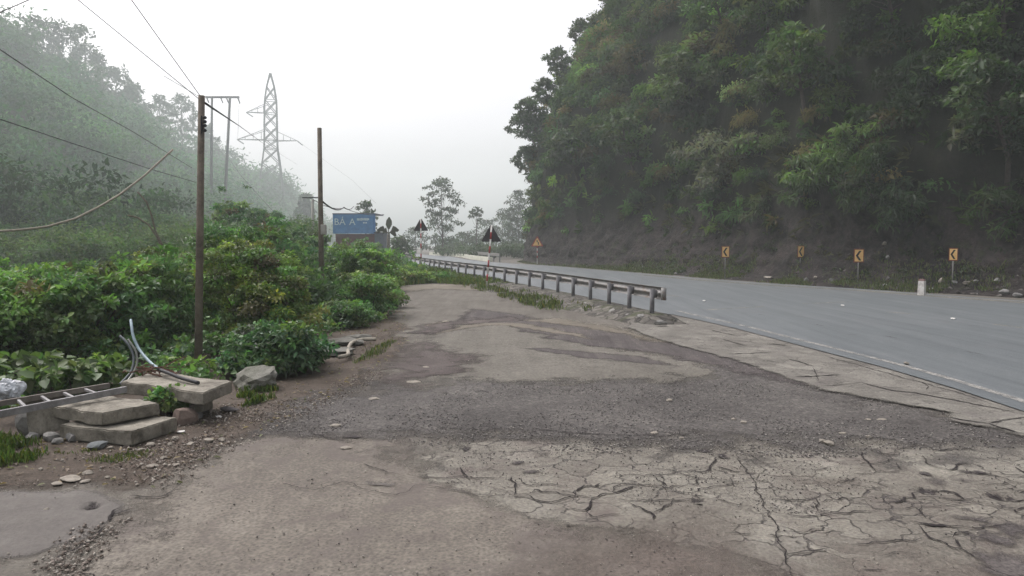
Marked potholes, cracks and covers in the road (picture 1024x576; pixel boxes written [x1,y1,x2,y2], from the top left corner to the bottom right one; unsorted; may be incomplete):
crack [284,429,762,520]
crack [775,445,1024,576]
crack [694,330,1024,434]
